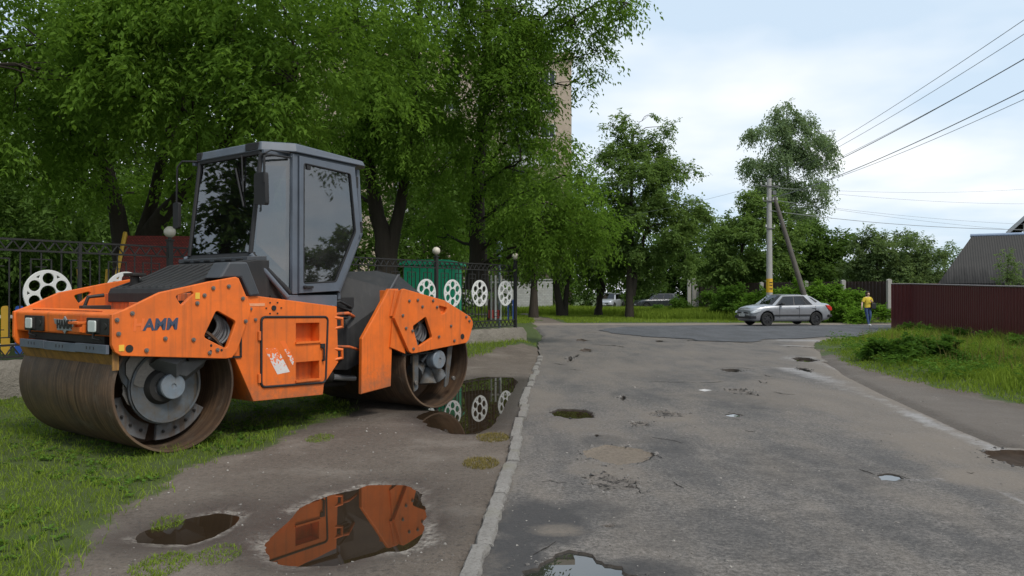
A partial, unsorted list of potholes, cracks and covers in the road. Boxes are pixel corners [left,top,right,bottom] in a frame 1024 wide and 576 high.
pothole [968,448,1024,469]
pothole [501,543,660,576]
pothole [539,408,603,420]
